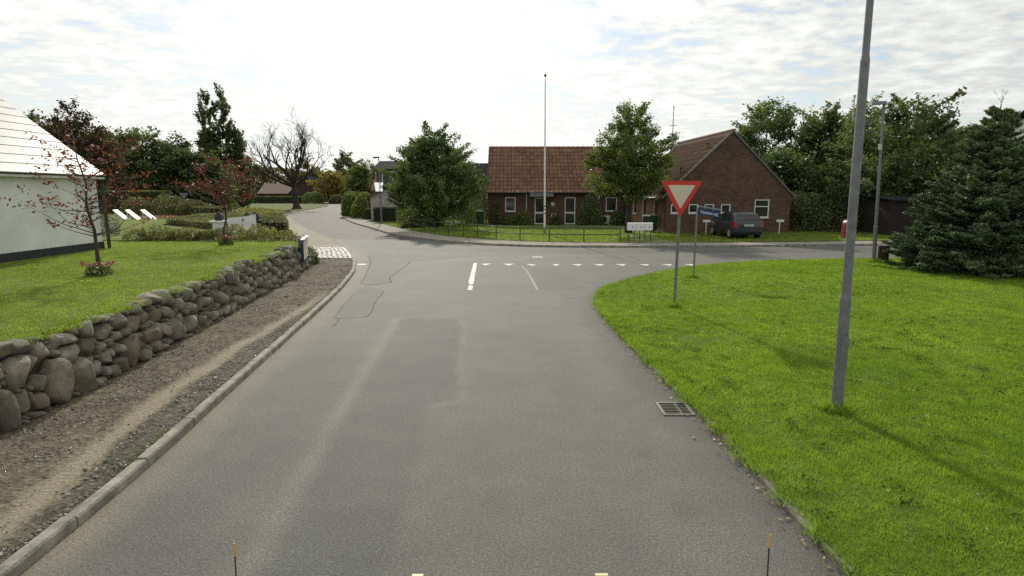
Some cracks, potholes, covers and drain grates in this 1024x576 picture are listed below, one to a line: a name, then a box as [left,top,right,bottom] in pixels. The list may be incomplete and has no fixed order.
crack [331,259,441,327]
drain grate [655,402,696,416]
